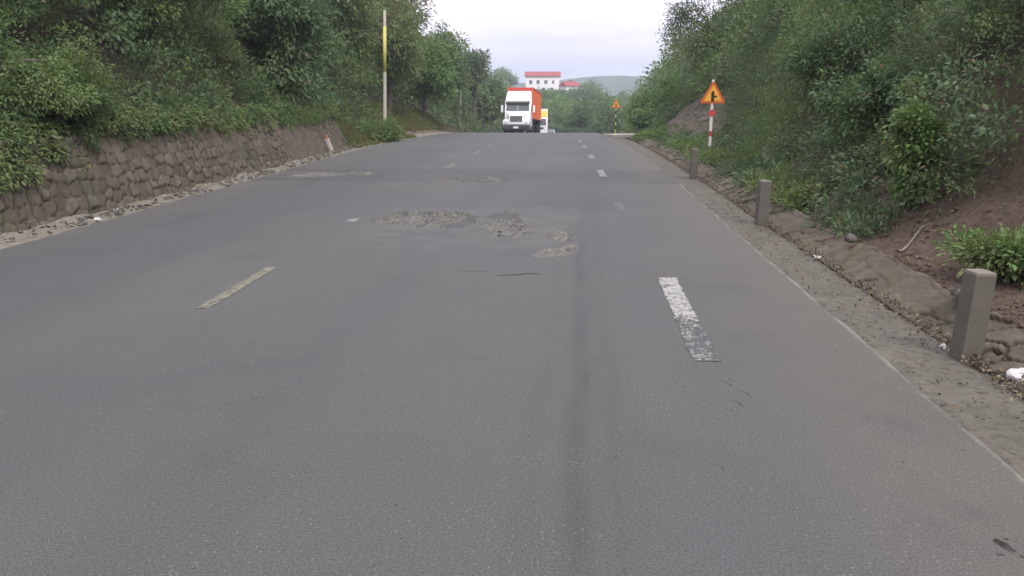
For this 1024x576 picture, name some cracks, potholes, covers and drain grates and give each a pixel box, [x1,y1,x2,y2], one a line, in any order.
pothole [533,245,578,257]
pothole [367,211,479,228]
pothole [992,538,1024,558]
pothole [480,210,535,239]
pothole [545,230,574,242]
crack [719,378,751,413]
